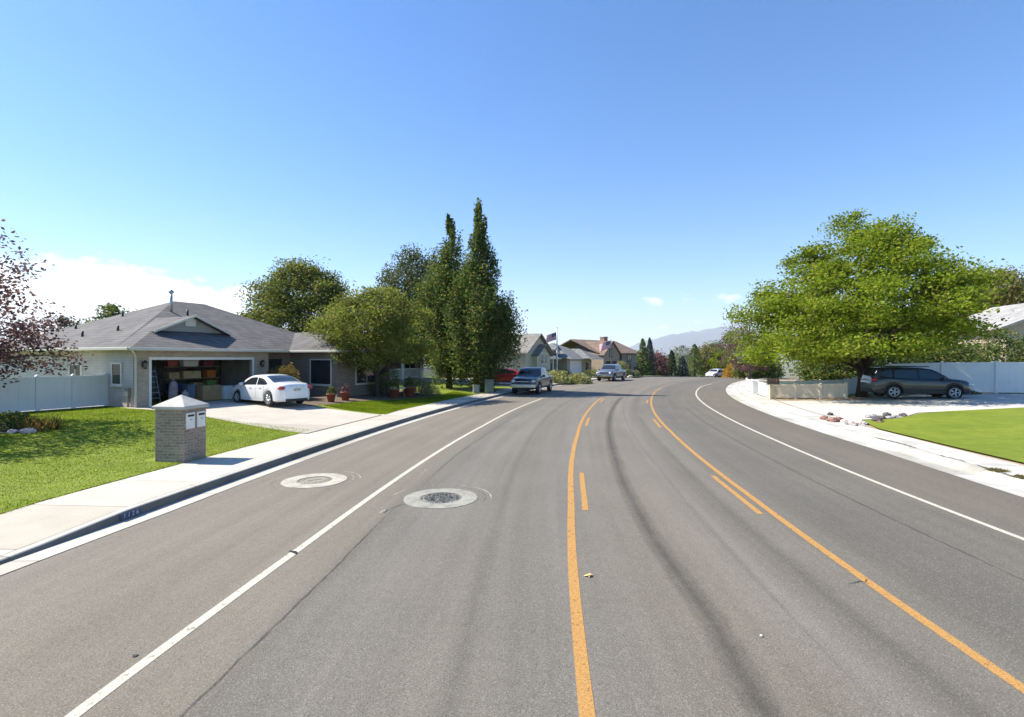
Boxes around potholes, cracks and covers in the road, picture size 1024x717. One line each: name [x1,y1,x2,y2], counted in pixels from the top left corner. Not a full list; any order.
manhole cover [404,488,478,509]
manhole cover [281,473,347,488]
